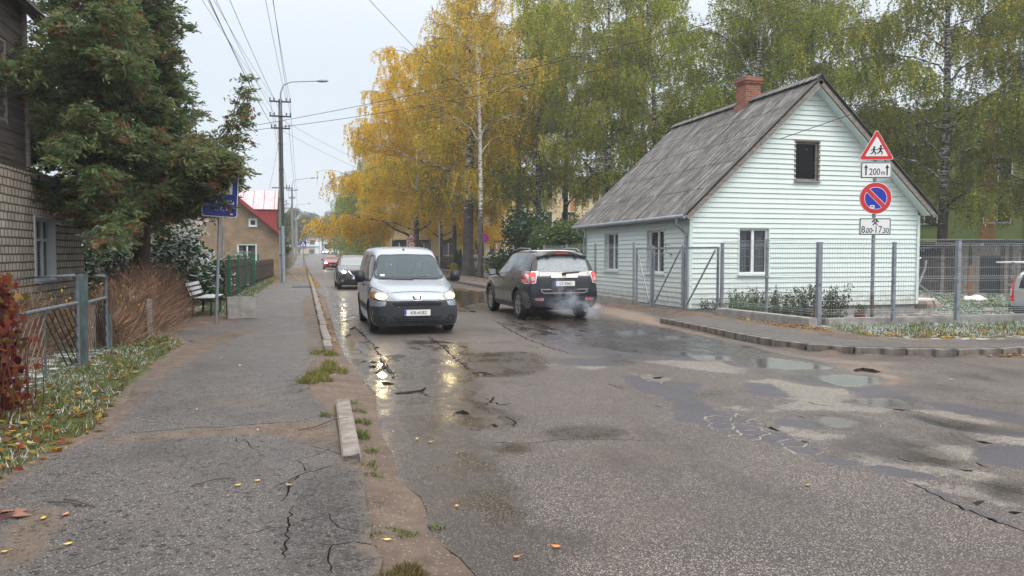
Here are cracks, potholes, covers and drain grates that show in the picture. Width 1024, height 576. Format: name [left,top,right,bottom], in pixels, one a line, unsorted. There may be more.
crack [247,445,377,574]
crack [703,402,828,455]
crack [358,341,435,405]
crack [462,397,517,430]
